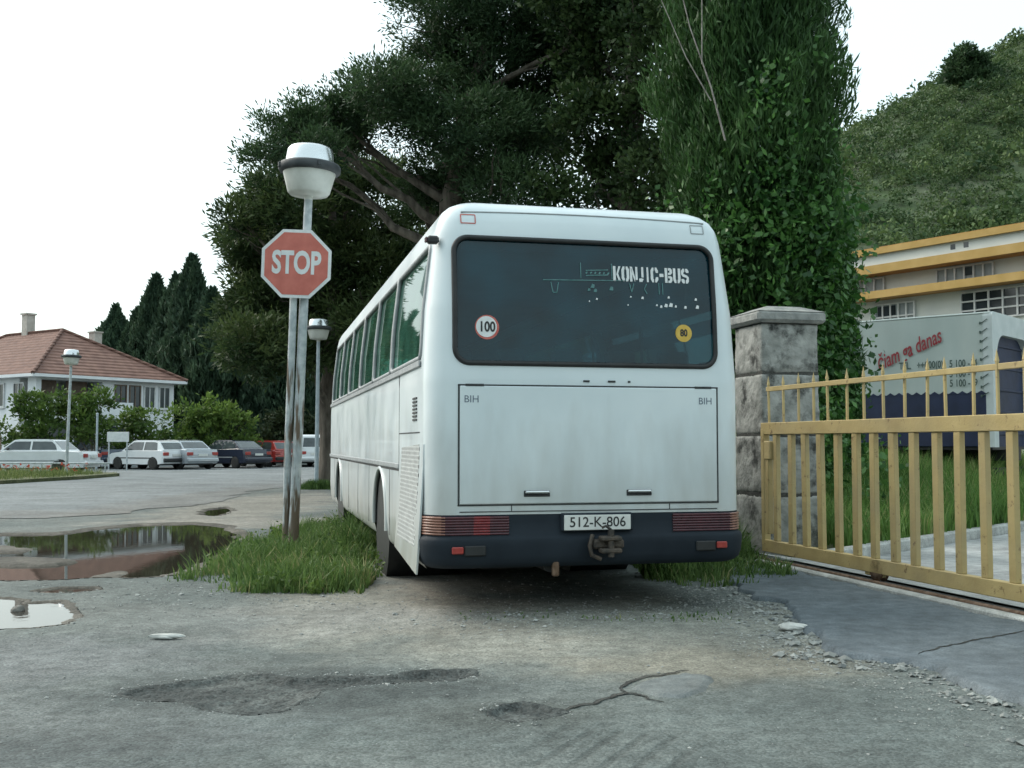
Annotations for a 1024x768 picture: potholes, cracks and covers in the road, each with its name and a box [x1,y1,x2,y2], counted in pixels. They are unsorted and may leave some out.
pothole [0,597,84,630]
crack [565,670,686,710]
pothole [116,668,480,716]
pothole [196,507,237,516]
pothole [0,522,252,581]
crack [918,631,1022,654]
pothole [486,701,572,723]
